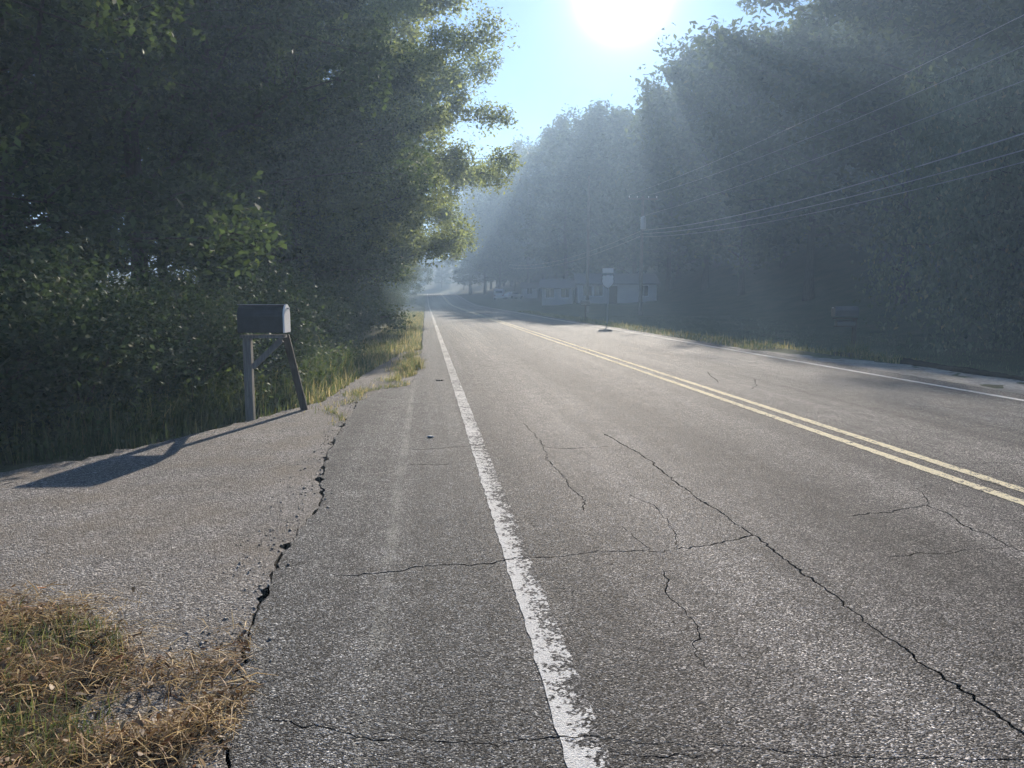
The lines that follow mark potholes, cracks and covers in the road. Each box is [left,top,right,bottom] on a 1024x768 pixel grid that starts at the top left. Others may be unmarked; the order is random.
crack [346,434,1024,736]
crack [267,718,1021,762]
